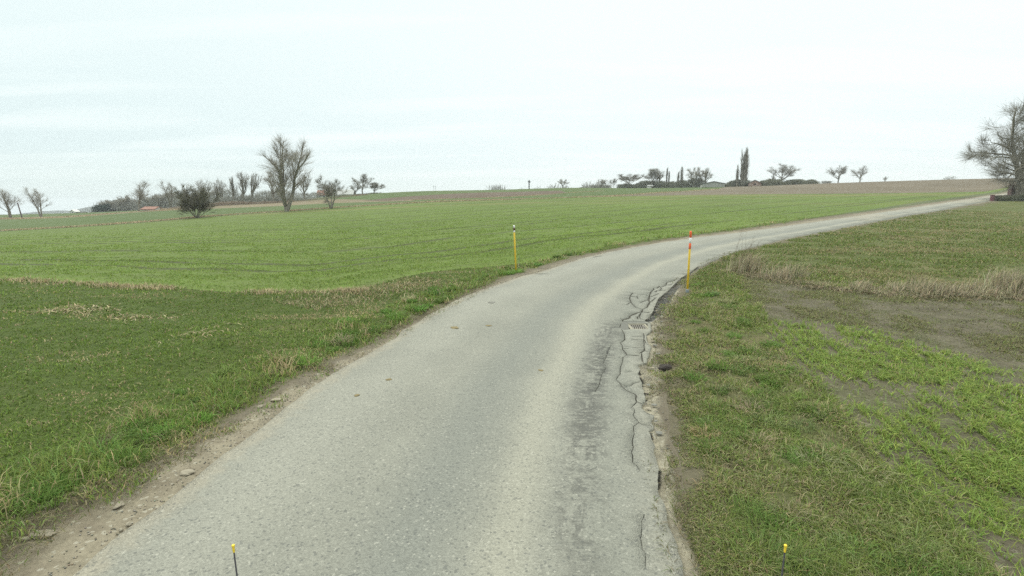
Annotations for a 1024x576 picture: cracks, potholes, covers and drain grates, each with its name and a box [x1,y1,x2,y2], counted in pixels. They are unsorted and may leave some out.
crack [595,281,672,471]
